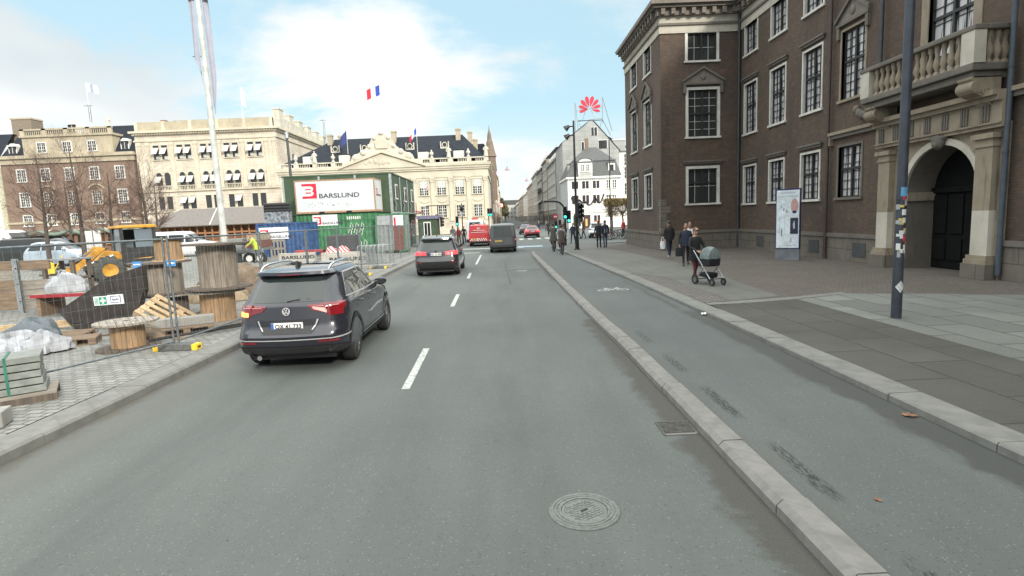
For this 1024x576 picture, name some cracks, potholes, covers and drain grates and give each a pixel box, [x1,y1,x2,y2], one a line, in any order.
manhole cover [549,493,621,531]
drain grate [654,420,699,436]
